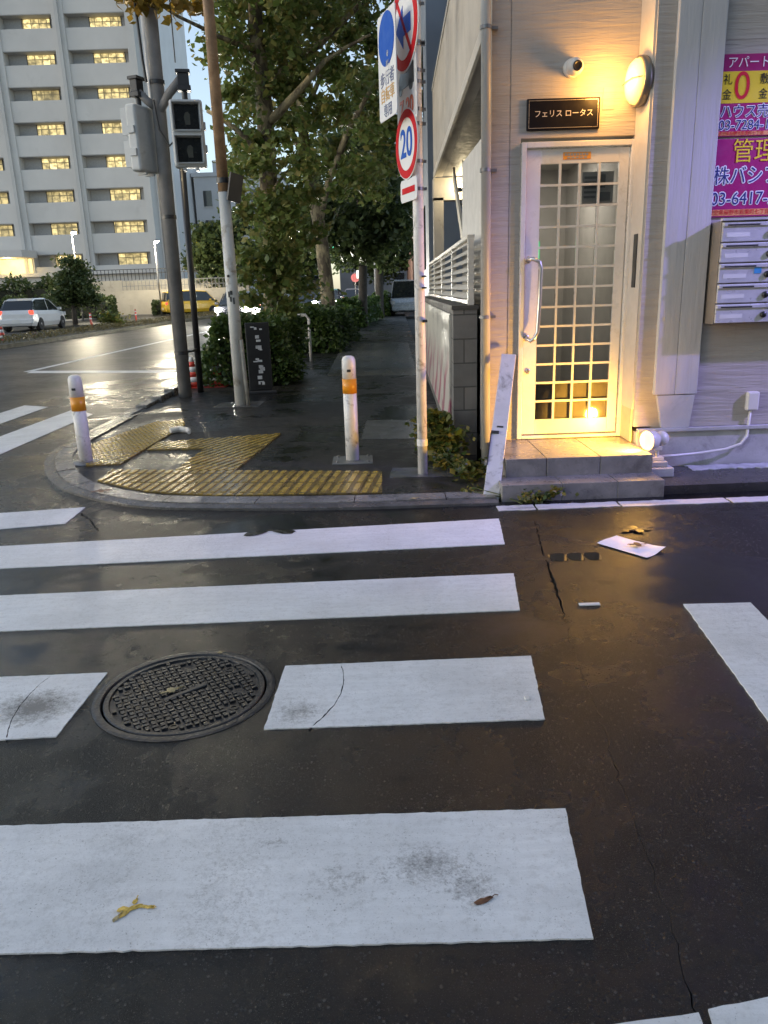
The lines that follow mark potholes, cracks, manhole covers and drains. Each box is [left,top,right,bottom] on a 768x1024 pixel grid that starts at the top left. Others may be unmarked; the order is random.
crack [6,678,48,742]
manhole cover [91,651,275,743]
crack [309,667,344,730]
